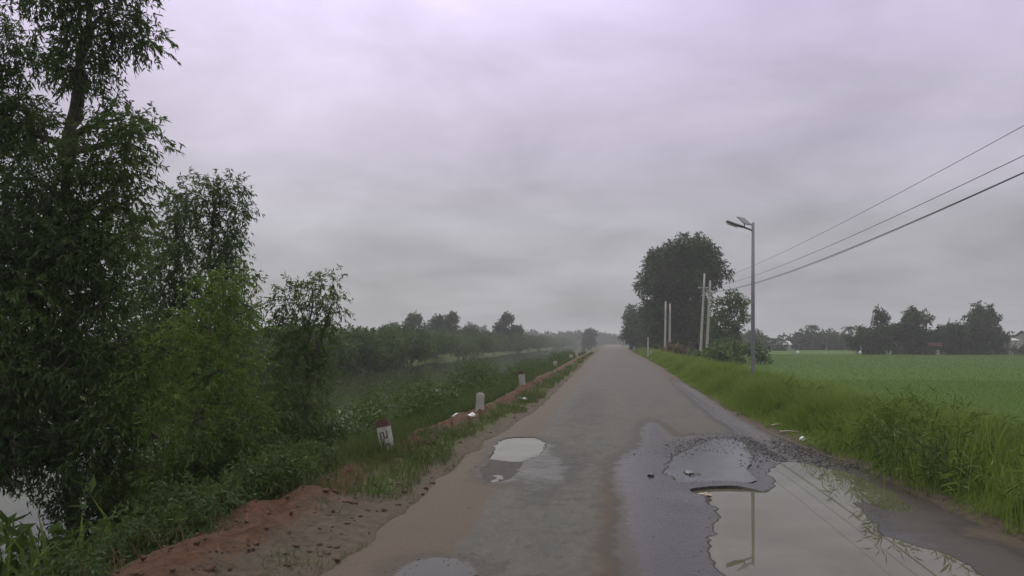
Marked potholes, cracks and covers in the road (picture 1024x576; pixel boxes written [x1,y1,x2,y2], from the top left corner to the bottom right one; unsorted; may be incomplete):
pothole [661,438,757,483]
pothole [479,437,548,483]
